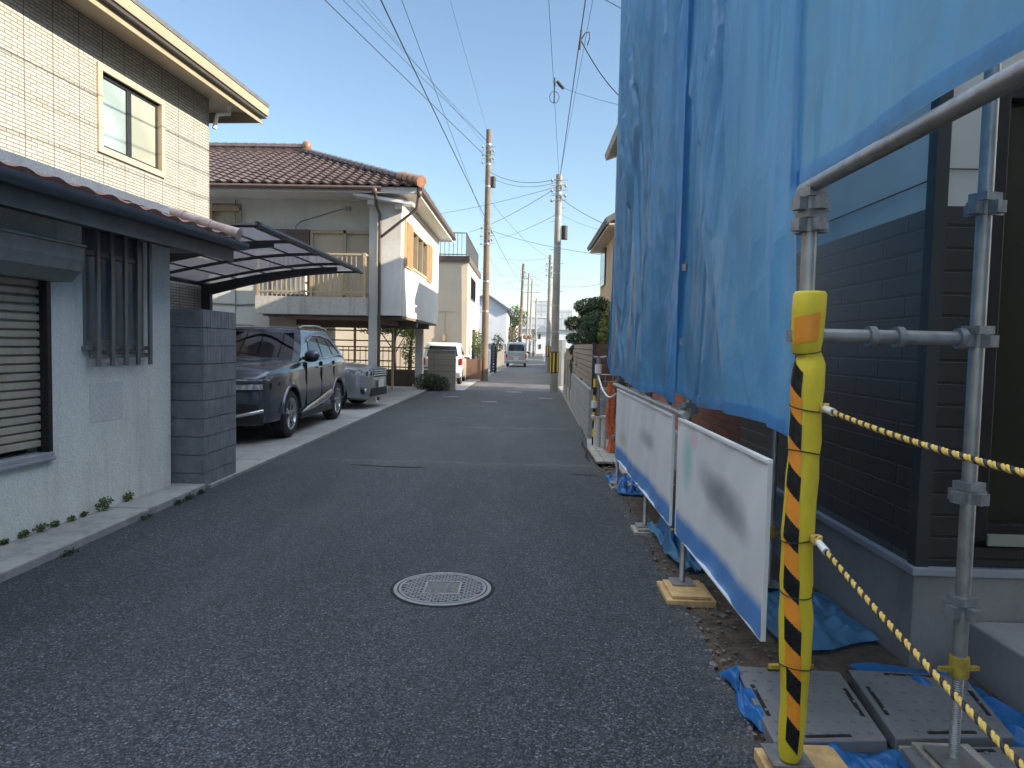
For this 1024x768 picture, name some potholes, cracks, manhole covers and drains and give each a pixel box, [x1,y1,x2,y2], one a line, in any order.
manhole cover [390,572,495,608]
